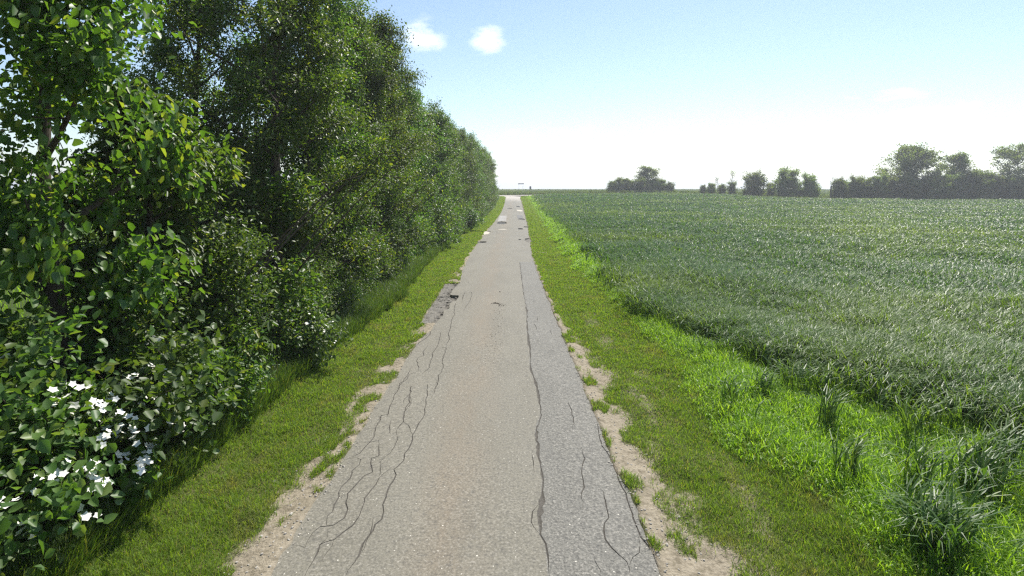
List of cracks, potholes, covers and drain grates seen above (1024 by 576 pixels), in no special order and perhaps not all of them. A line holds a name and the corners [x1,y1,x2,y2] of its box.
crack [301,282,472,575]
crack [581,424,658,573]
pothole [421,284,458,324]
